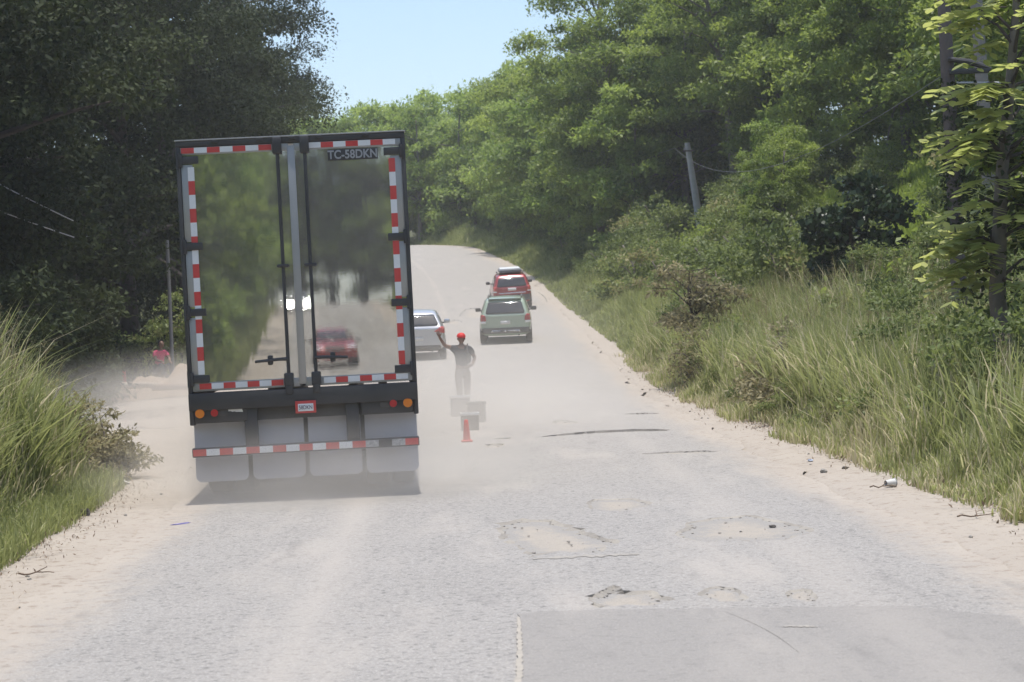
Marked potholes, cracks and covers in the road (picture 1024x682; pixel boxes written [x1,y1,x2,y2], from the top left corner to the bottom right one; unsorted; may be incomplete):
pothole [697,586,749,602]
crack [542,413,718,454]
pothole [585,585,675,608]
crack [726,611,818,652]
pothole [675,515,814,542]
pothole [785,589,818,602]
pothole [495,518,620,558]
